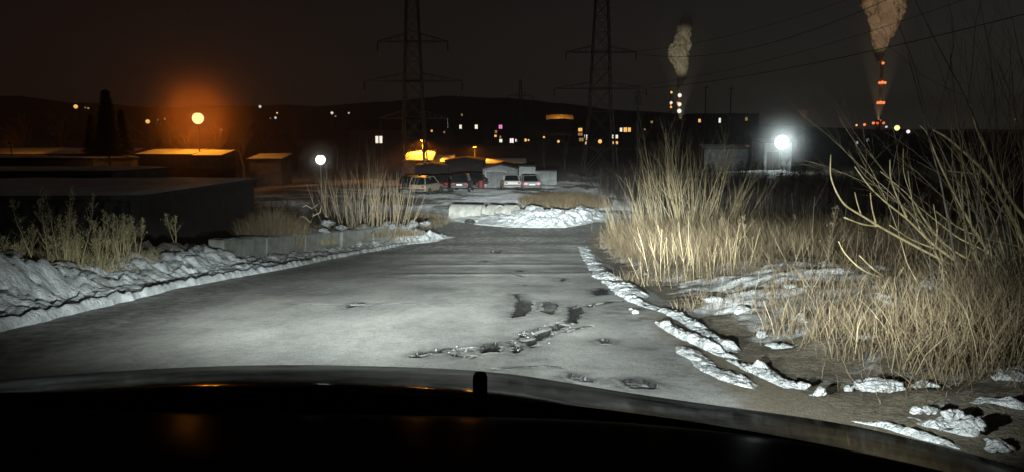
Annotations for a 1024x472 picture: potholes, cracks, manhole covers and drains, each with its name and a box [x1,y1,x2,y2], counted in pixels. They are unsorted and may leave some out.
pothole [612,378,665,391]
pothole [561,373,600,384]
pothole [587,288,613,296]
crack [409,301,627,370]
pothole [559,305,589,326]
pothole [506,294,544,319]
pothole [531,302,563,316]
